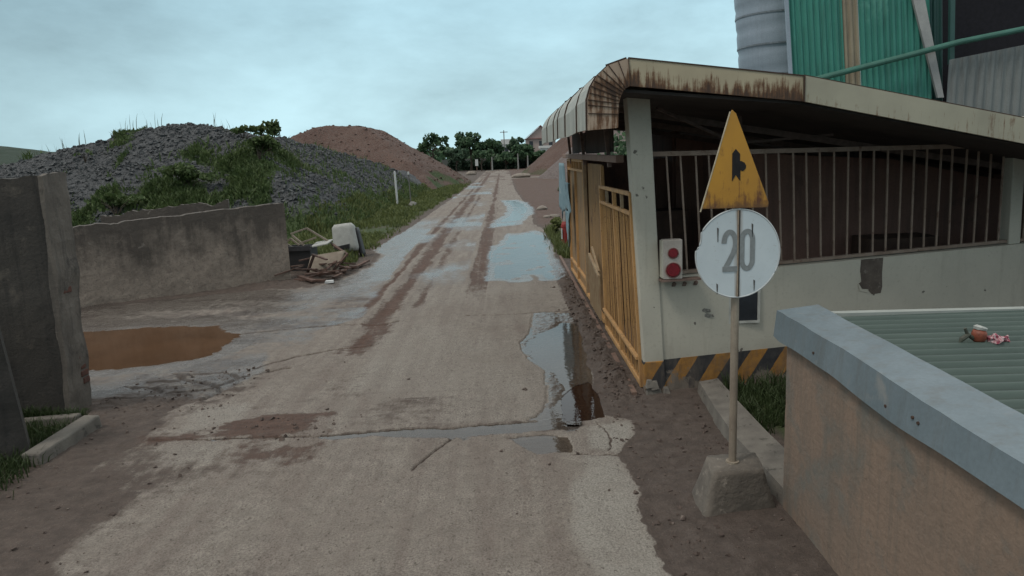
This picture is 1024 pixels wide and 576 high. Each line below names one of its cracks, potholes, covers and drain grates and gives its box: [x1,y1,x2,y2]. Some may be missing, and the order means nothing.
pothole [500,432,578,456]
pothole [513,306,609,429]
crack [146,420,621,471]
